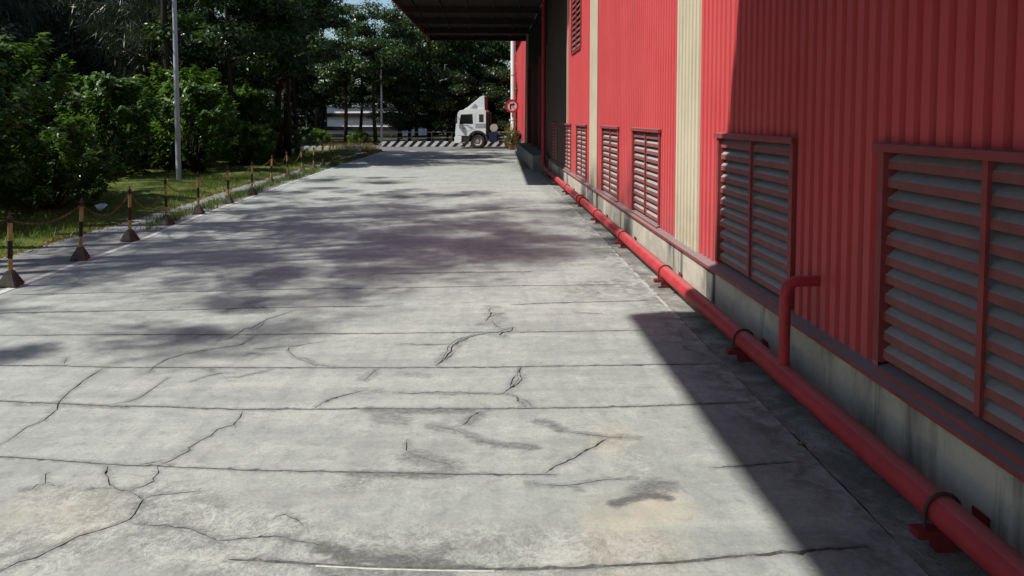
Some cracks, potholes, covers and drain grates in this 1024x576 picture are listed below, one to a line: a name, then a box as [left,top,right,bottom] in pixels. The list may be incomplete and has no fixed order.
crack [0,271,868,572]
